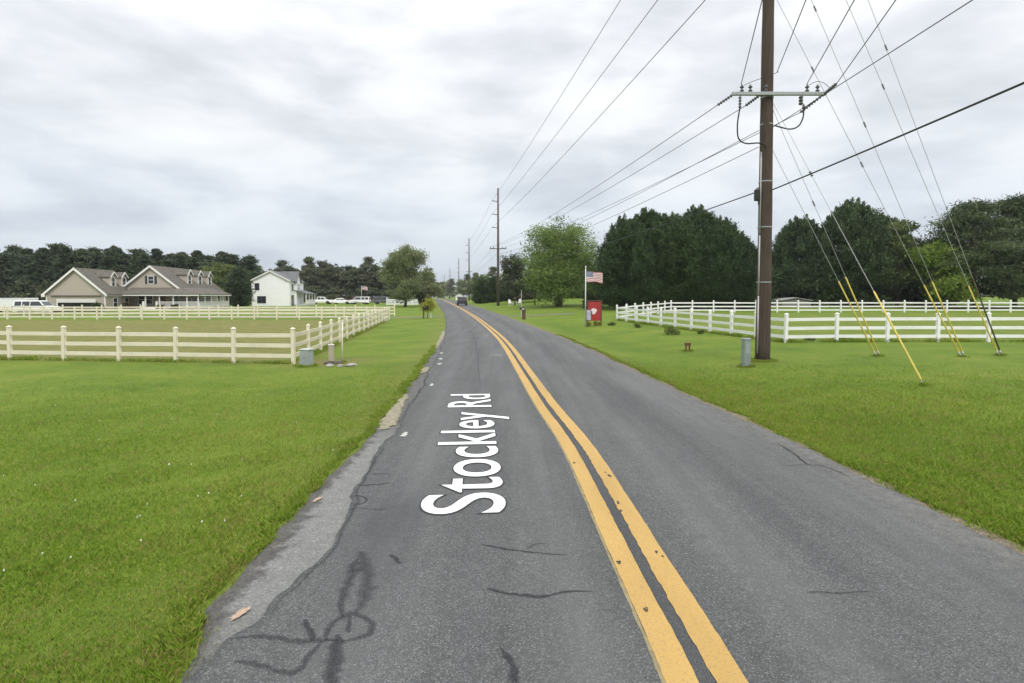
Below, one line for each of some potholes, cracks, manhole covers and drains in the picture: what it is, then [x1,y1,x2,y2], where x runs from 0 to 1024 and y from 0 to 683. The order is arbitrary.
crack [486,545,565,555]
crack [487,587,583,598]
crack [499,646,519,683]
